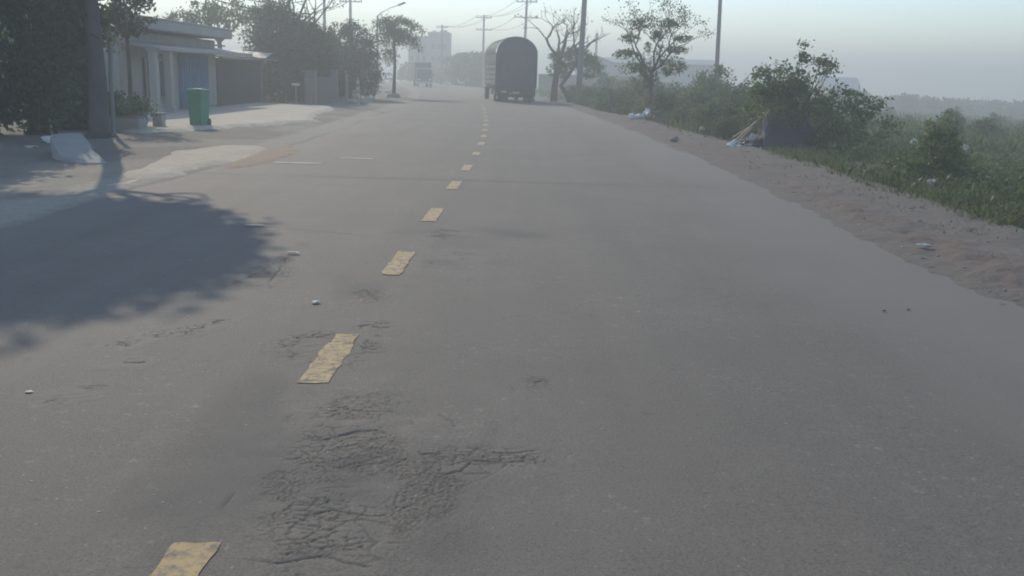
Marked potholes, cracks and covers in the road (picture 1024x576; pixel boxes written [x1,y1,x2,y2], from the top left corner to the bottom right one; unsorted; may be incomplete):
crack [0,223,576,576]
